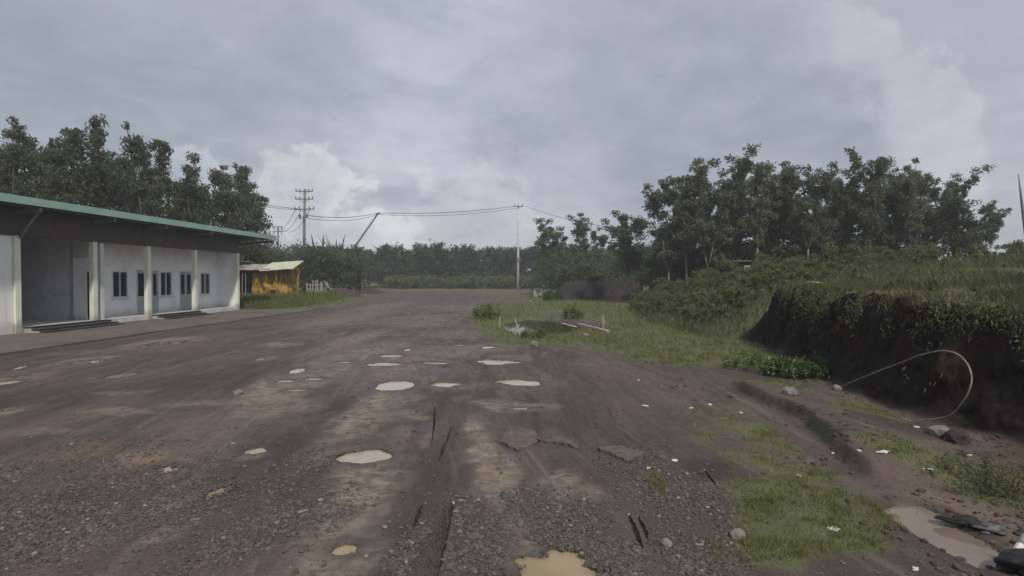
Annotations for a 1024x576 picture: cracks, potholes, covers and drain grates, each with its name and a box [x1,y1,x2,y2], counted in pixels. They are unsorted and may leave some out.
pothole [243,446,268,454]
pothole [375,380,415,391]
pothole [331,543,359,555]
crack [431,405,451,461]
crack [409,502,454,576]
pothole [334,448,394,463]
pothole [513,546,606,576]
pothole [493,378,542,386]
